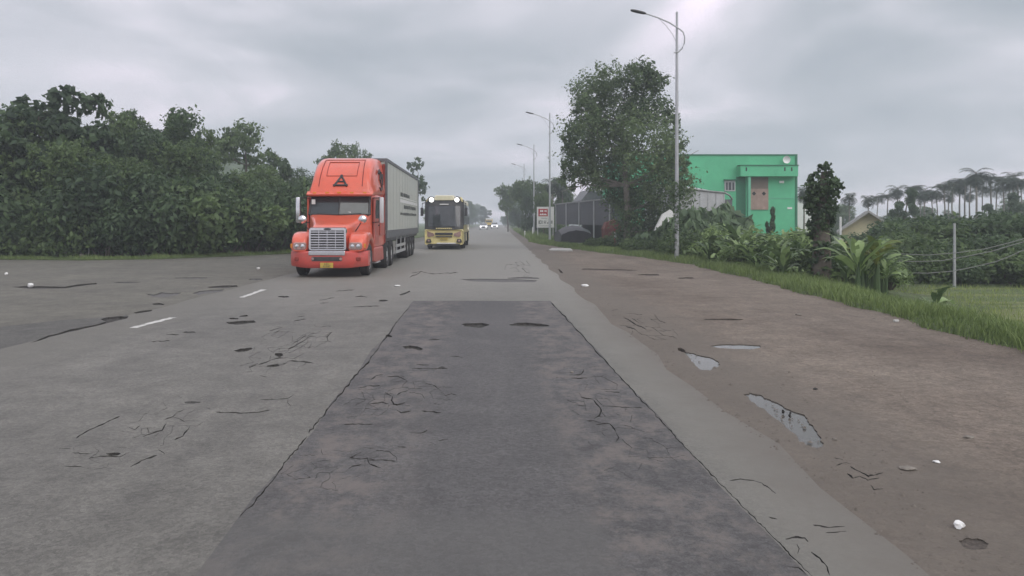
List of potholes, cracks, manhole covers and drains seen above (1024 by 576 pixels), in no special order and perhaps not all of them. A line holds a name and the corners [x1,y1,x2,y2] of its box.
crack [344,339,465,425]
crack [836,458,881,490]
pothole [959,538,988,550]
crack [65,397,209,469]
crack [612,310,677,340]
crack [280,446,404,491]
pothole [685,352,720,370]
pothole [744,393,824,448]
crack [241,316,332,377]
crack [556,366,694,482]
crack [218,394,294,414]
